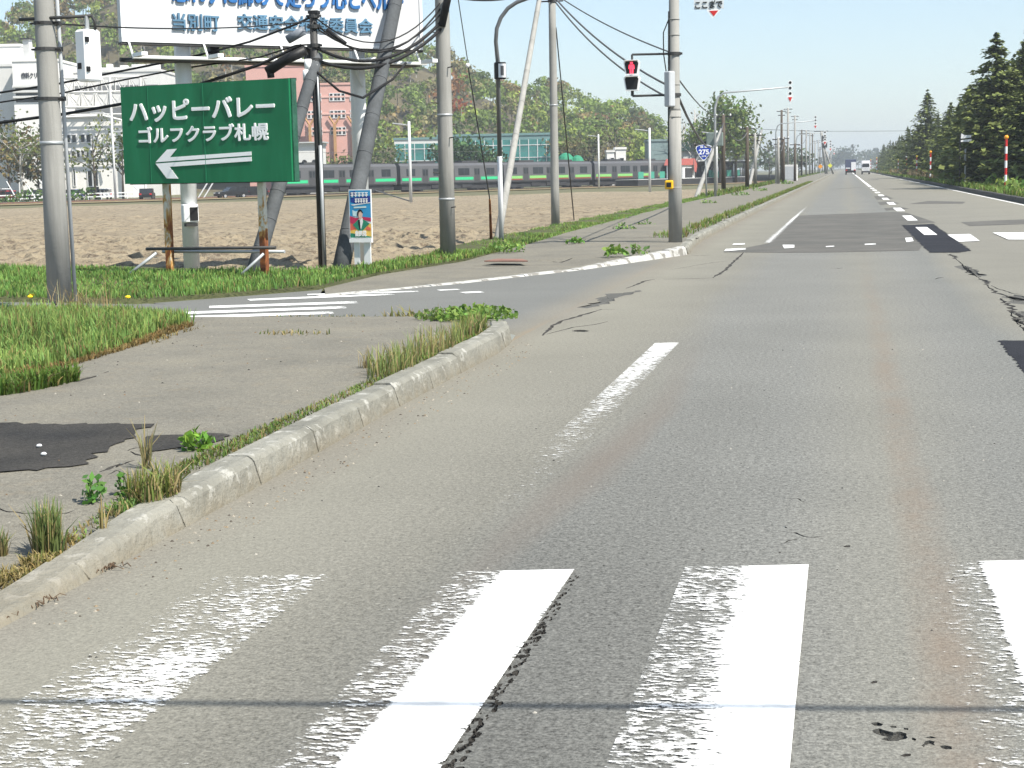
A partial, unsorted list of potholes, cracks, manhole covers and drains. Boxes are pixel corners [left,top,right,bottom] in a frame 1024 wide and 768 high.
pothole [912,736,952,749]
crack [542,237,744,336]
pothole [871,722,908,741]
crack [936,254,1024,331]
crack [441,575,579,768]
